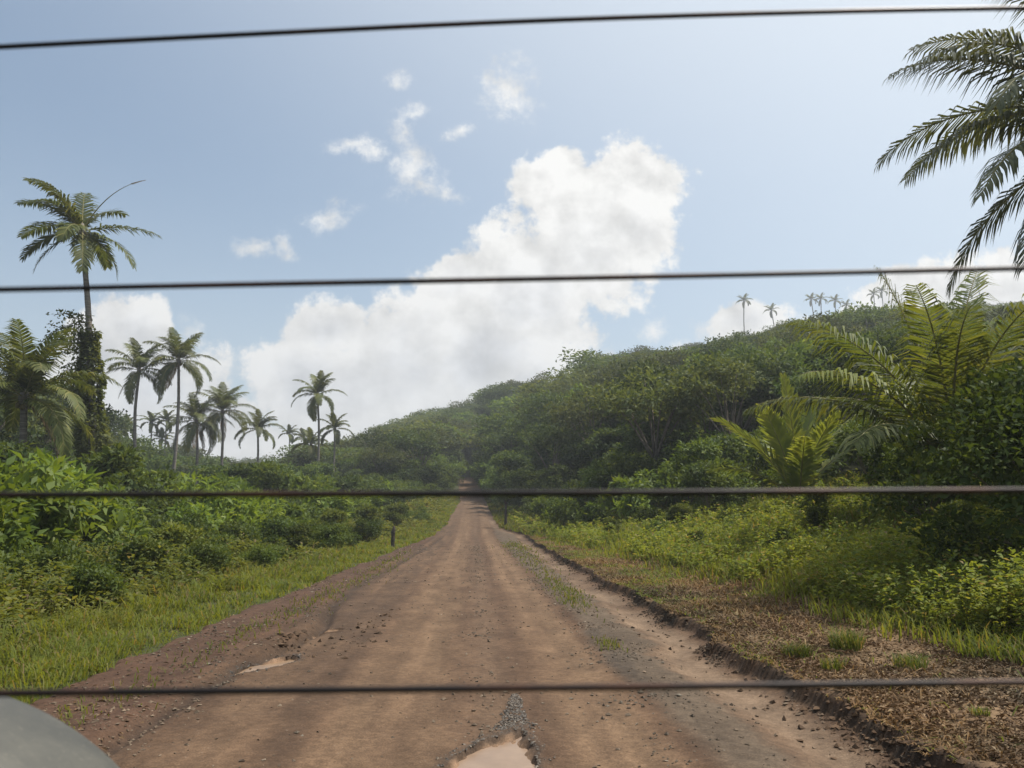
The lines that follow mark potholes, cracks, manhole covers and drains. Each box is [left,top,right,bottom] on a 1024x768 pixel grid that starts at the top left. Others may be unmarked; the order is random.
pothole [221,653,308,678]
pothole [427,693,556,768]
